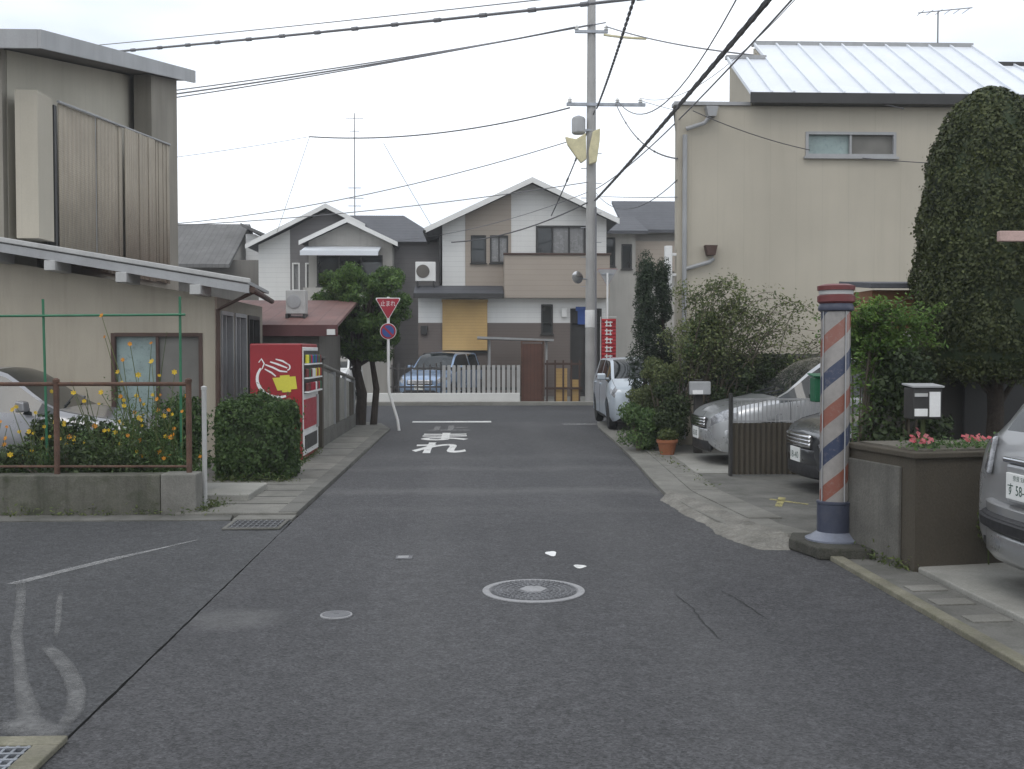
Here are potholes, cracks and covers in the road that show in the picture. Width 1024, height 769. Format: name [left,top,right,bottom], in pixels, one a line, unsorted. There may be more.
drain grate [222,519,290,530]
crack [676,590,768,639]
drain grate [0,736,68,769]
manhole cover [320,610,353,620]
manhole cover [482,579,585,603]
